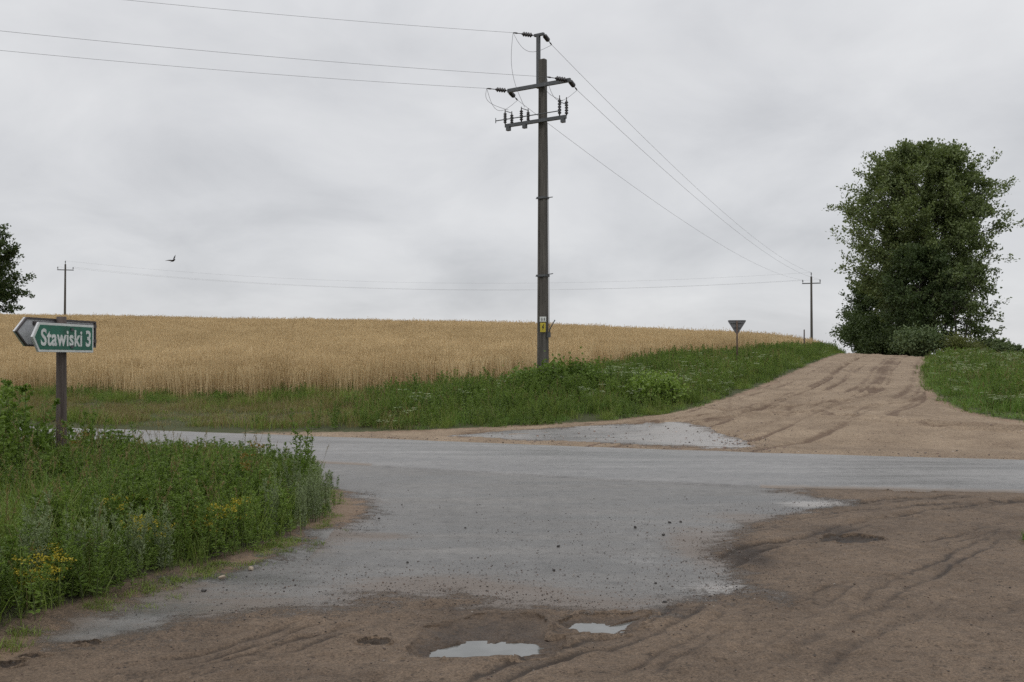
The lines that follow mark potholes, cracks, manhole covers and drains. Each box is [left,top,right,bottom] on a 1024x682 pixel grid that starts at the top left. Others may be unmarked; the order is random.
pothole [400,610,580,663]
pothole [816,531,889,545]
pothole [354,634,394,645]
pothole [544,609,661,641]
